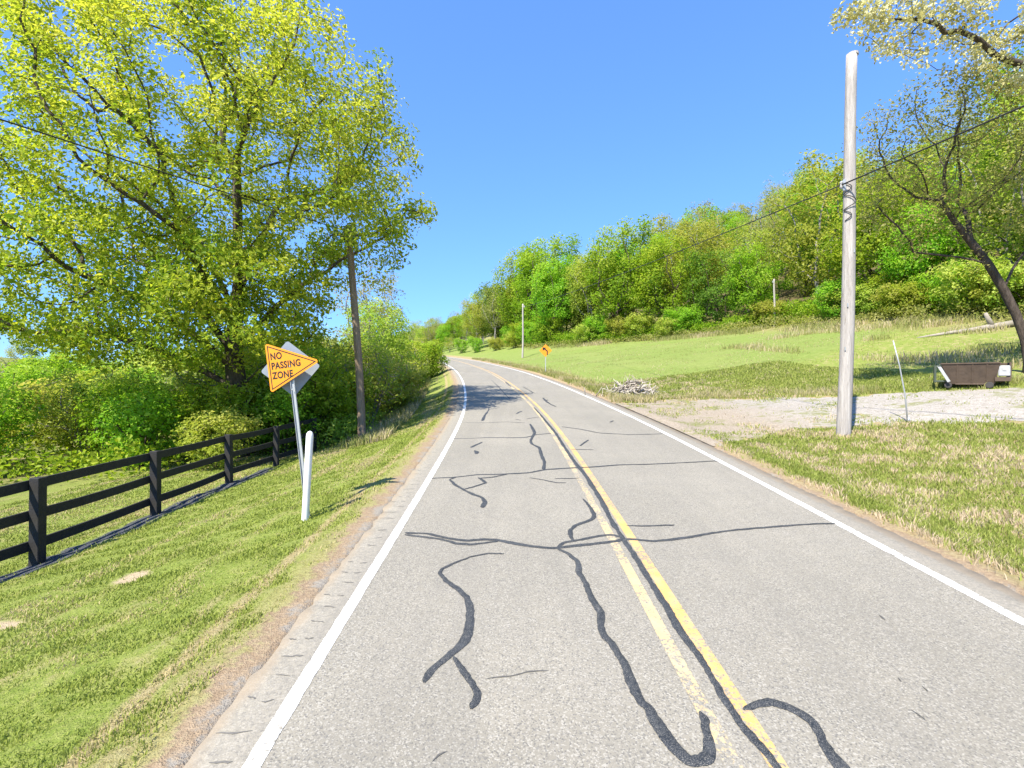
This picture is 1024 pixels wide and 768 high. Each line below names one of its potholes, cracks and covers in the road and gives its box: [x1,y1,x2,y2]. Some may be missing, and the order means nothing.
crack [467,382,556,423]
crack [486,670,549,679]
